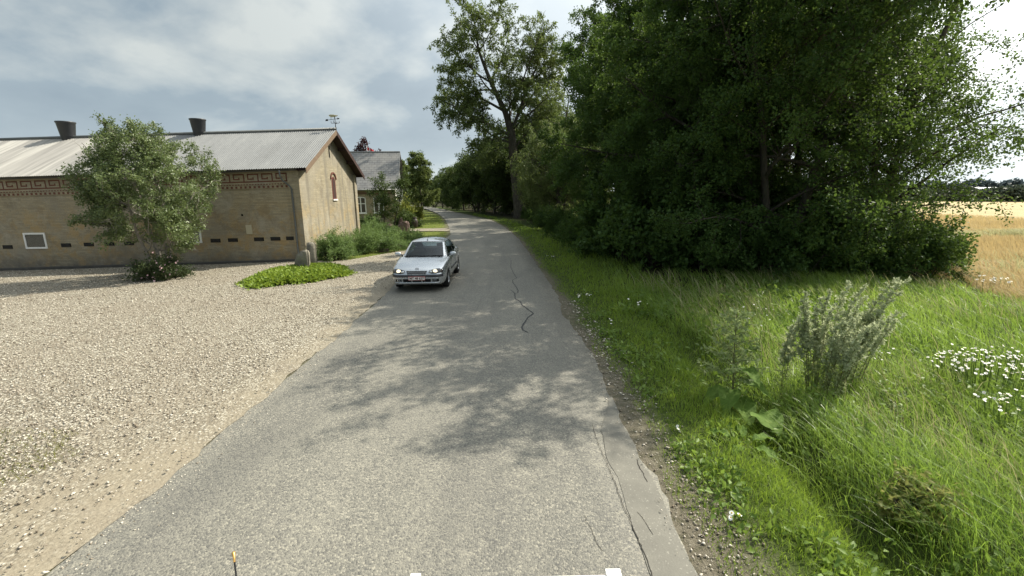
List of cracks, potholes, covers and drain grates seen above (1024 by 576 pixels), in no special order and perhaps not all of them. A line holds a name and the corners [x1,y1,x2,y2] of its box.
crack [592,425,653,576]
